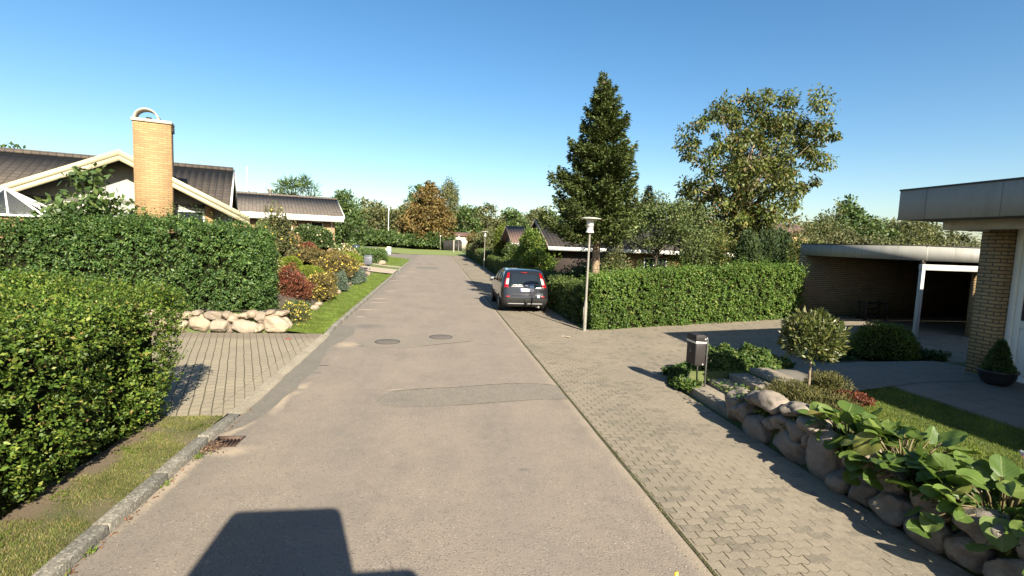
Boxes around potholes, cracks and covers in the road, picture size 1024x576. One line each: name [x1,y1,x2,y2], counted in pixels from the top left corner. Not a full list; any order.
drain grate [212,436,246,447]
